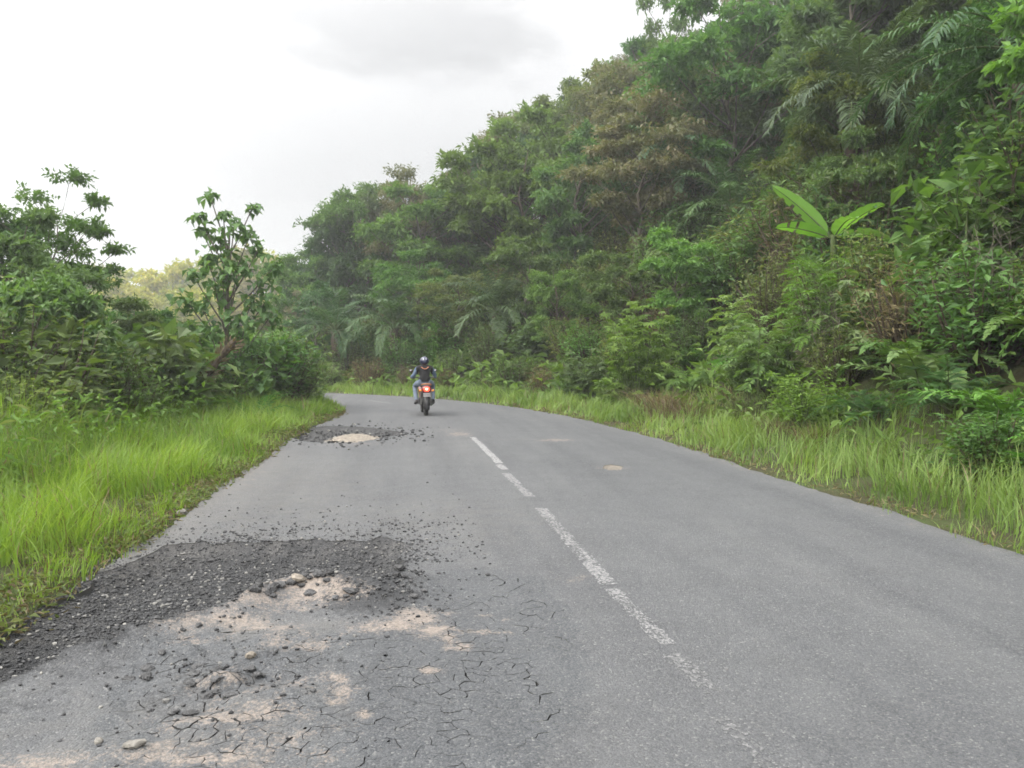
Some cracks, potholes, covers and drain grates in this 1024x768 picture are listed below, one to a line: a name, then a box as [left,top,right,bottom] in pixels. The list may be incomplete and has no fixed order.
crack [127,576,563,768]
pothole [0,535,405,683]
pothole [297,426,406,443]
